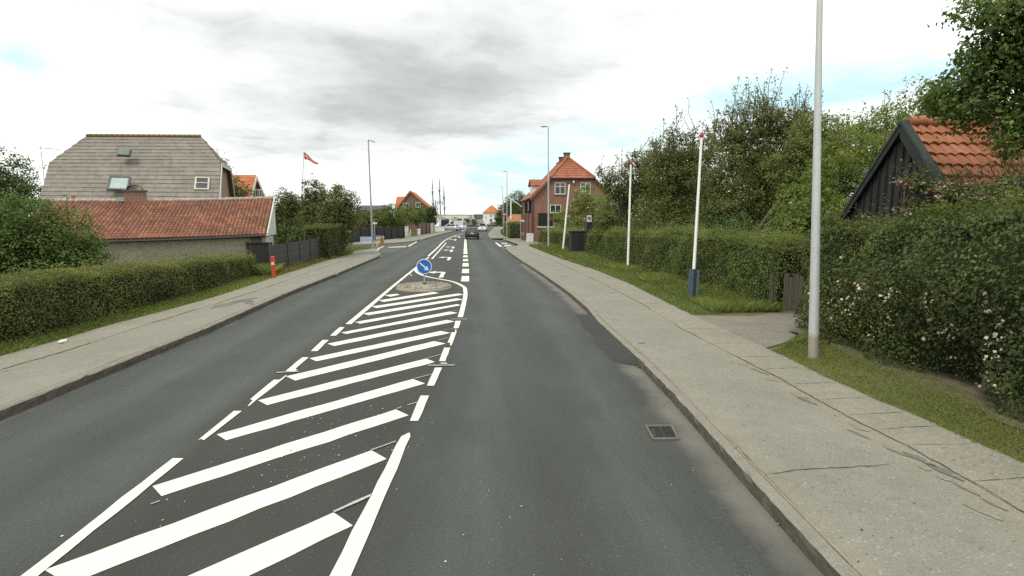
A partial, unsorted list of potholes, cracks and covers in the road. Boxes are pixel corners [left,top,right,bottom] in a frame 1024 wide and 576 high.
crack [736,447,892,475]
drain grate [644,424,679,440]
